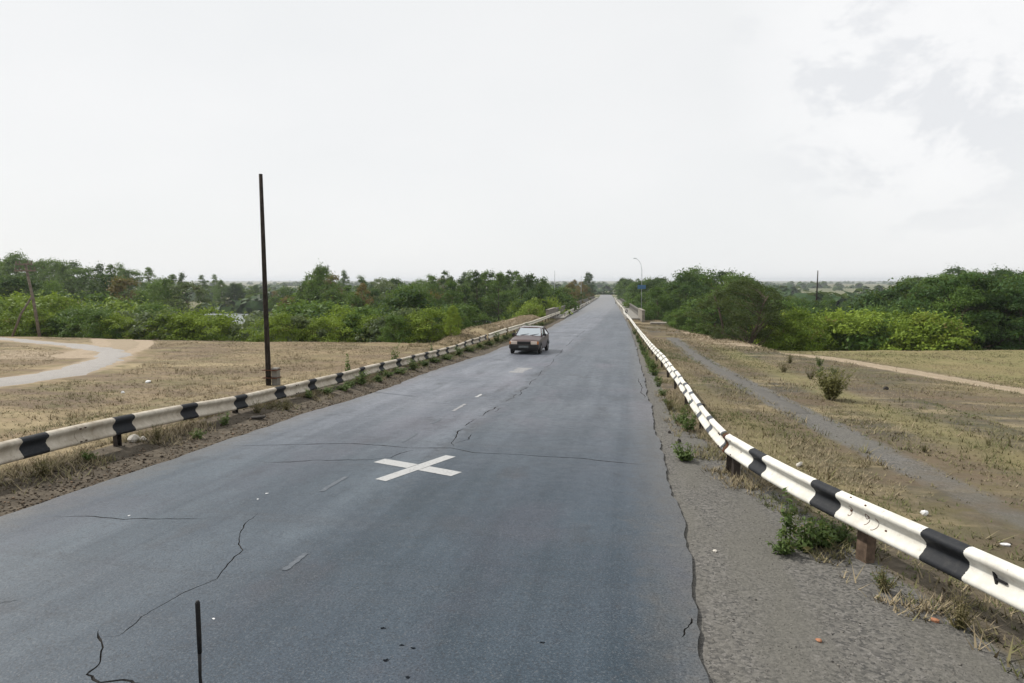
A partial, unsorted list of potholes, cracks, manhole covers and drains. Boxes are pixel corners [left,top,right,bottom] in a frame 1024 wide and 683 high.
crack [86,515,256,683]
crack [250,330,631,464]
